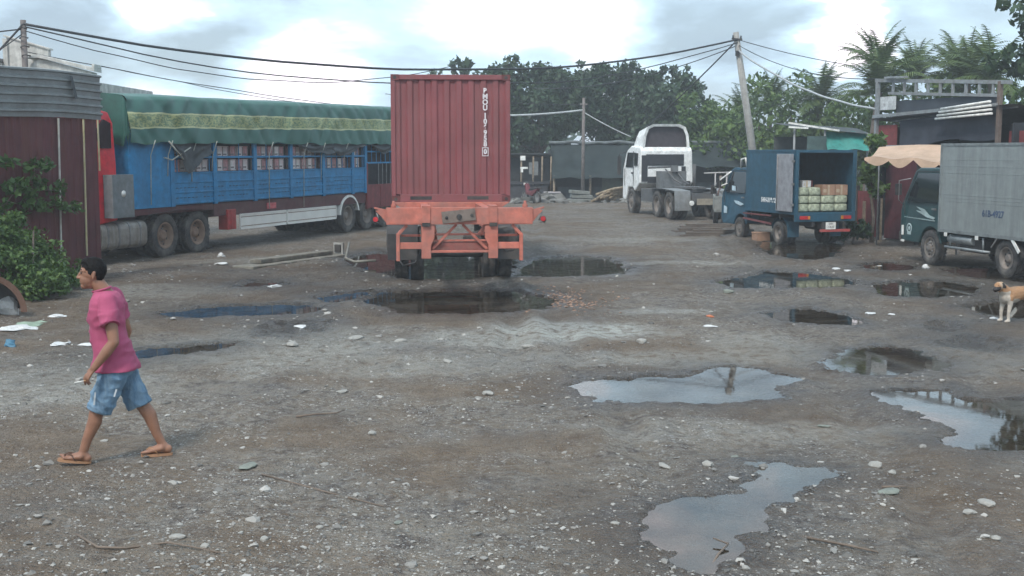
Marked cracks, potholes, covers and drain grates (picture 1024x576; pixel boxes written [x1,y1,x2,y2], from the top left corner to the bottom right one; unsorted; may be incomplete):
pothole [812,343,964,378]
pothole [350,286,573,317]
pothole [701,268,867,290]
pothole [511,254,642,277]
pothole [848,384,1024,455]
pothole [603,457,858,576]
pothole [855,279,994,299]
pothole [133,338,253,362]
pothole [560,363,817,408]
pothole [845,261,924,272]
pothole [748,304,876,328]
pothole [146,300,333,320]
